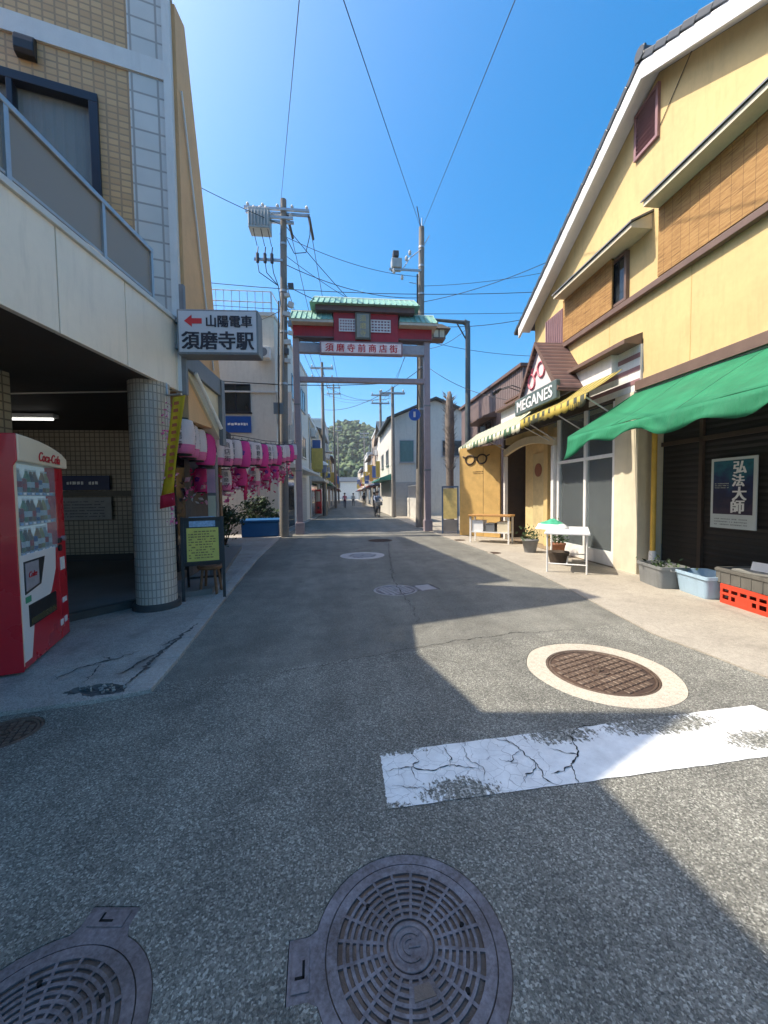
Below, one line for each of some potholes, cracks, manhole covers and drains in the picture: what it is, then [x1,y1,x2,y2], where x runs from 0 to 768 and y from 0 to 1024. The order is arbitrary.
manhole cover [286,854,514,1024]
manhole cover [0,716,45,748]
manhole cover [373,585,418,595]
crack [56,653,133,682]
manhole cover [527,644,688,709]
manhole cover [0,907,153,1024]
